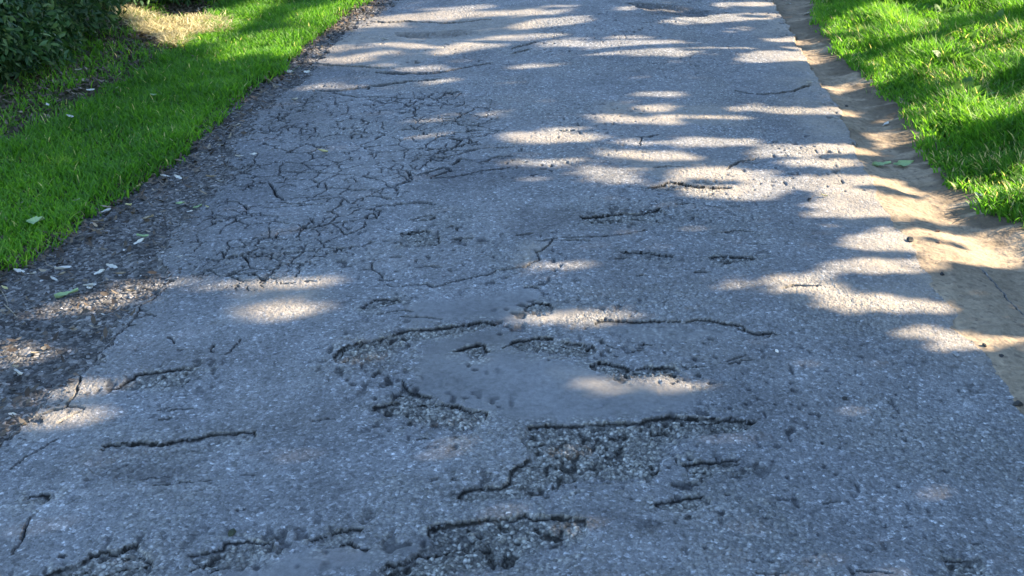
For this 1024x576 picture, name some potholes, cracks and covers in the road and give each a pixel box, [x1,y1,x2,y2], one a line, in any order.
pothole [456,413,762,506]
crack [0,286,243,470]
crack [185,62,649,292]
pothole [369,380,489,438]
